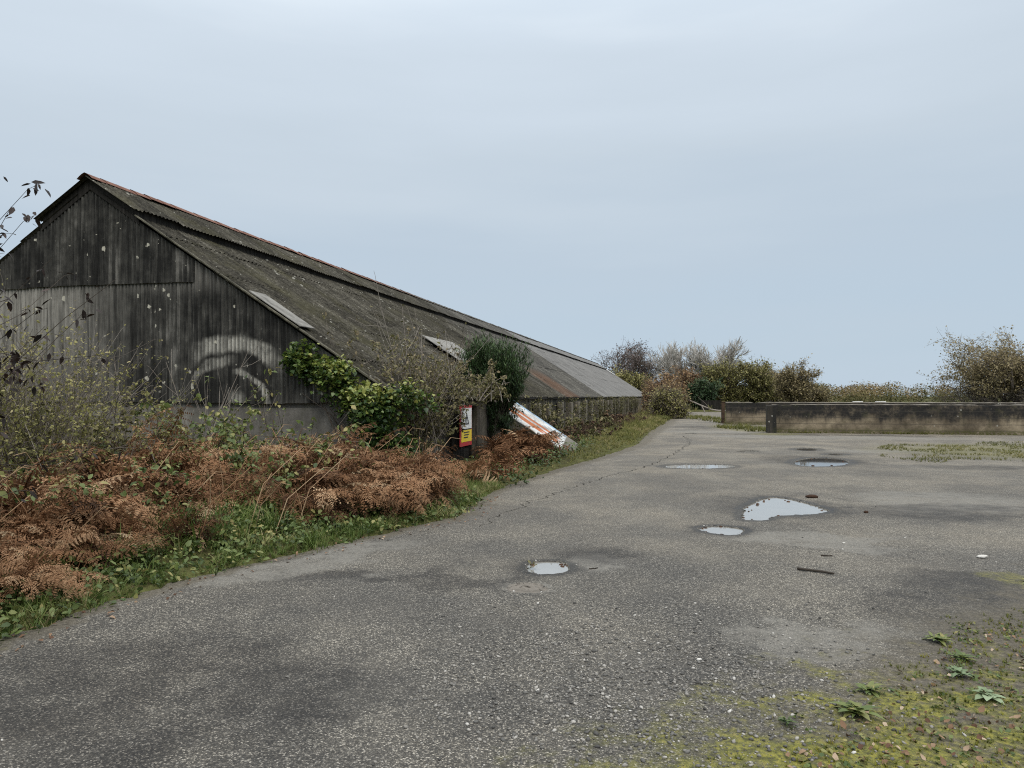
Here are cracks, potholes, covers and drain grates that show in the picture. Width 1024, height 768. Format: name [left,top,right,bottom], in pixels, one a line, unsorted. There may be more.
crack [479,436,691,527]
pothole [525,560,570,574]
pothole [697,525,745,535]
pothole [741,497,829,520]
pothole [794,457,850,466]
